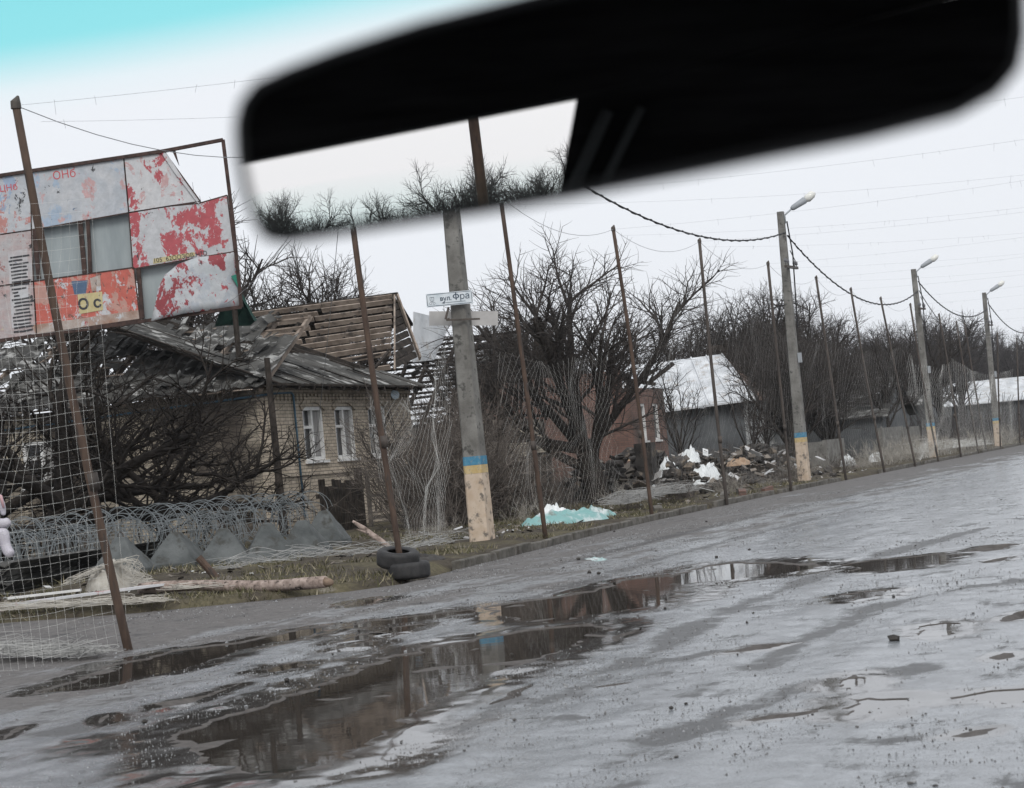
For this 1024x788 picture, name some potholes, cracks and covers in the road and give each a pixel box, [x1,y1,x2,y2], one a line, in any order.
pothole [342,597,389,606]
pothole [967,544,1020,552]
pothole [339,609,476,629]
pothole [841,589,891,601]
pothole [1000,611,1024,621]
pothole [24,625,330,696]
pothole [167,623,613,775]
pothole [842,553,963,572]
pothole [915,622,960,637]
